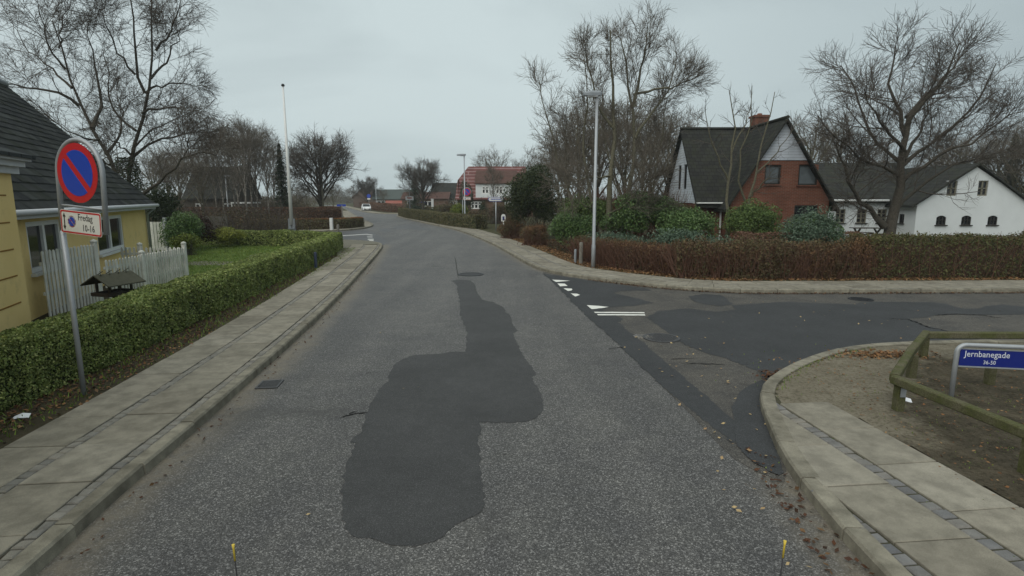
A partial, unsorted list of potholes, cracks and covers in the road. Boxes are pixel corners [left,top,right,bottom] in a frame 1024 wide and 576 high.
manhole cover [633,333,680,343]
